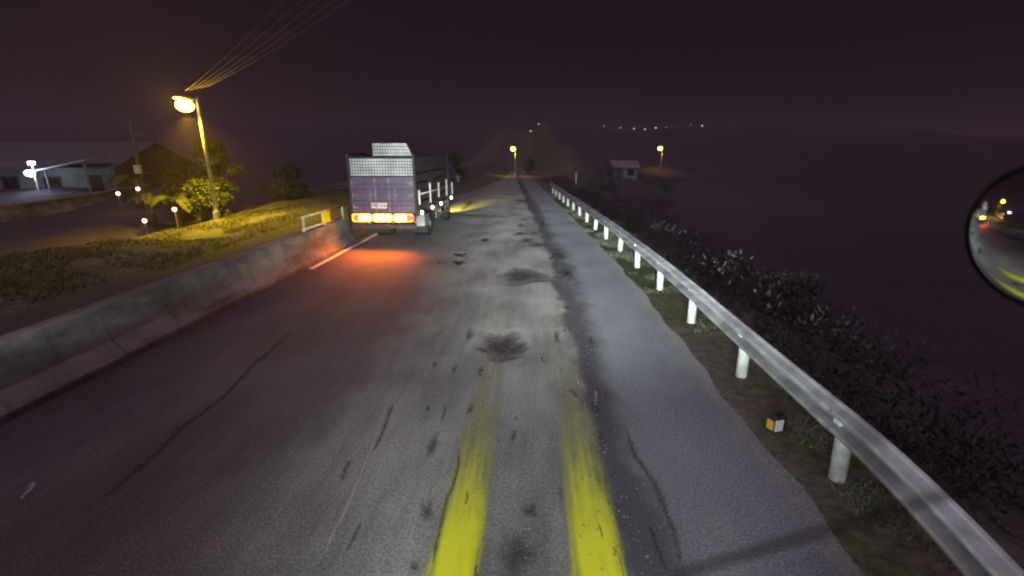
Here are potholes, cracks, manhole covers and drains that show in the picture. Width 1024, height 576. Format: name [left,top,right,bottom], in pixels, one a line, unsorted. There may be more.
crack [324,402,392,553]
pothole [488,335,517,357]
crack [102,336,287,498]
pothole [505,269,541,281]
crack [627,430,681,570]
